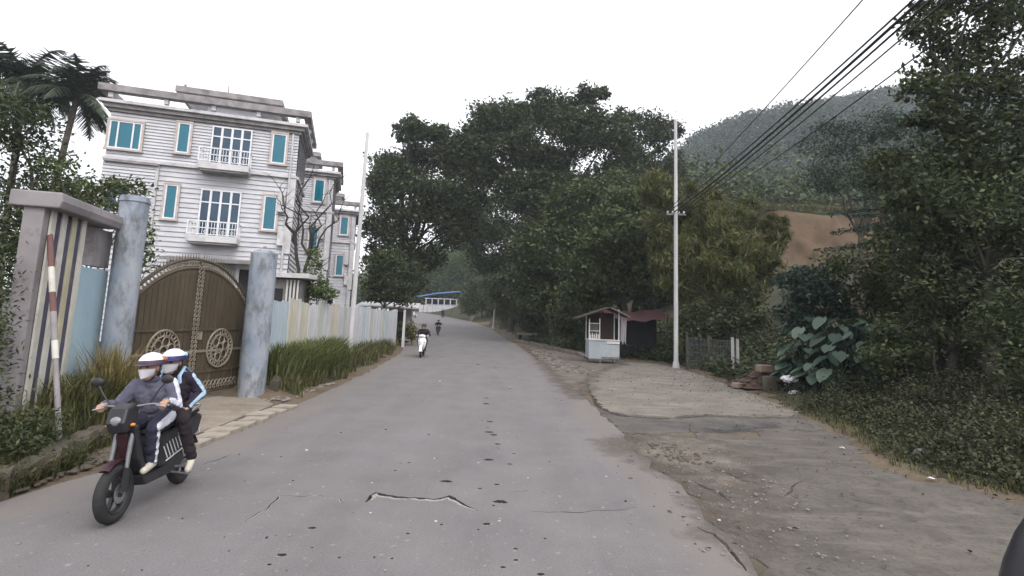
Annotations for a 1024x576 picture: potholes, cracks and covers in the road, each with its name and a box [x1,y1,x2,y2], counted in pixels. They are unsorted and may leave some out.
crack [365,492,477,511]
crack [242,495,343,524]
crack [697,527,747,571]
